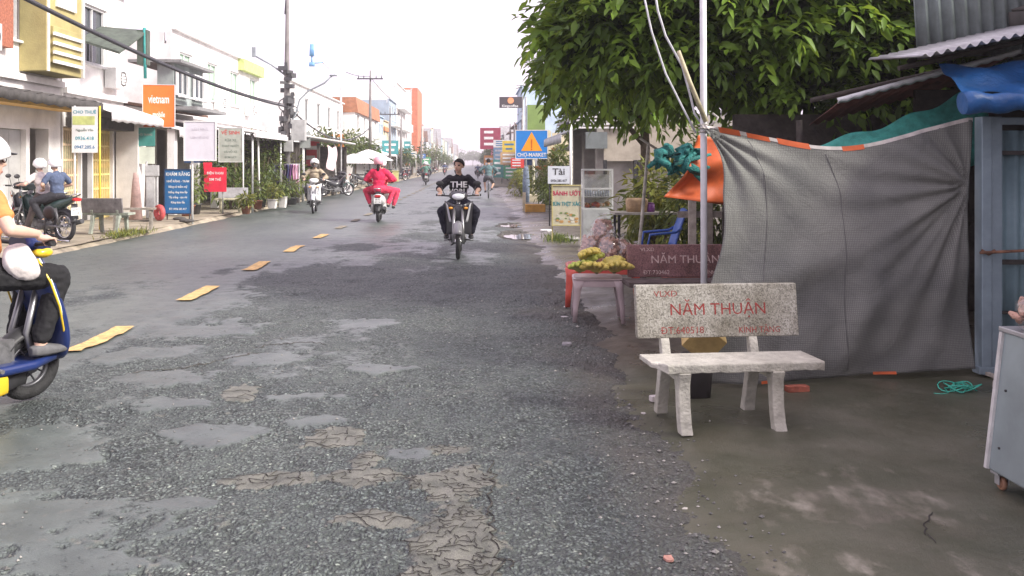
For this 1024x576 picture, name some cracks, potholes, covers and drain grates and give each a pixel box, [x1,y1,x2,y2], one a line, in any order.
crack [332,508,415,527]
crack [221,425,417,491]
crack [396,465,503,576]
crack [923,512,936,543]
